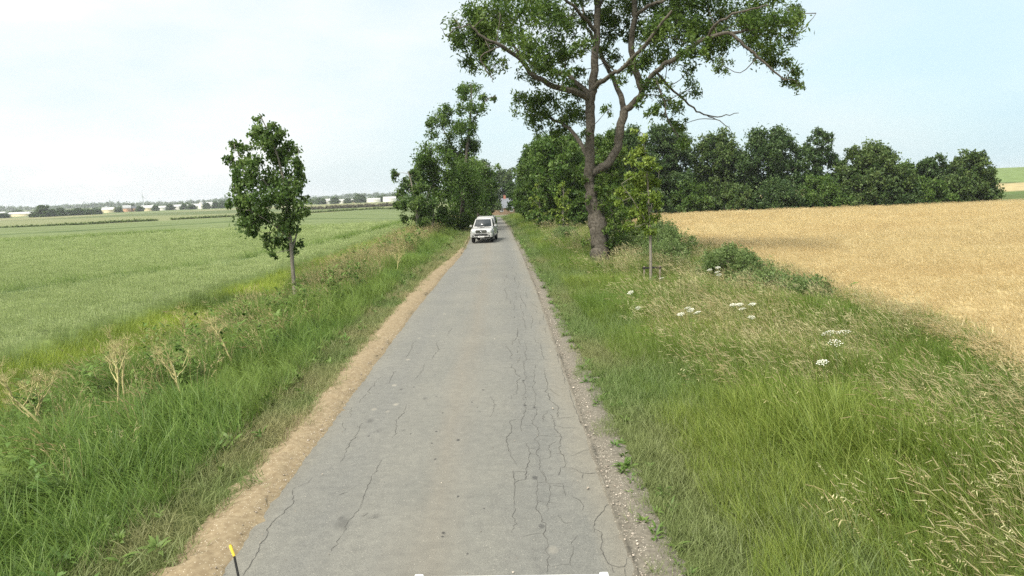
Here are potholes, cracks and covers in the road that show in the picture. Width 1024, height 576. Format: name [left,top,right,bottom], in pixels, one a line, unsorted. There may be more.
crack [593,507,627,576]
crack [243,479,311,575]
crack [504,276,584,571]
